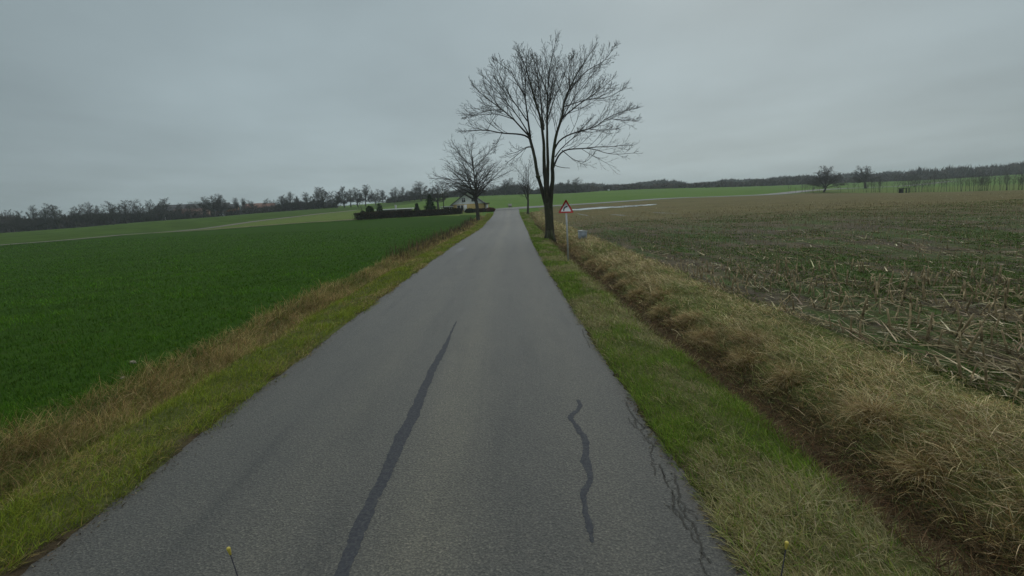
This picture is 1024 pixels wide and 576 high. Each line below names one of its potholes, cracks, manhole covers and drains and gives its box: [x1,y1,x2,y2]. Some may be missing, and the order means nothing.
crack [626,403,710,576]
